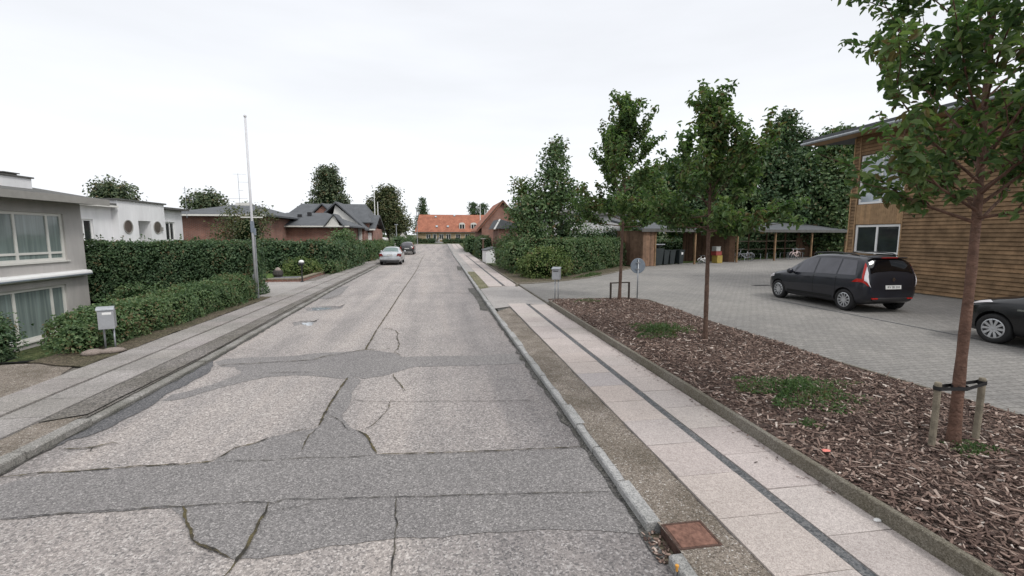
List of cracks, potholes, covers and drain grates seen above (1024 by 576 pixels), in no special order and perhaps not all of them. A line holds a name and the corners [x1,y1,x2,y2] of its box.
crack [217,328,400,373]
crack [0,491,607,576]
crack [0,374,531,477]
manhole cover [641,520,723,565]
